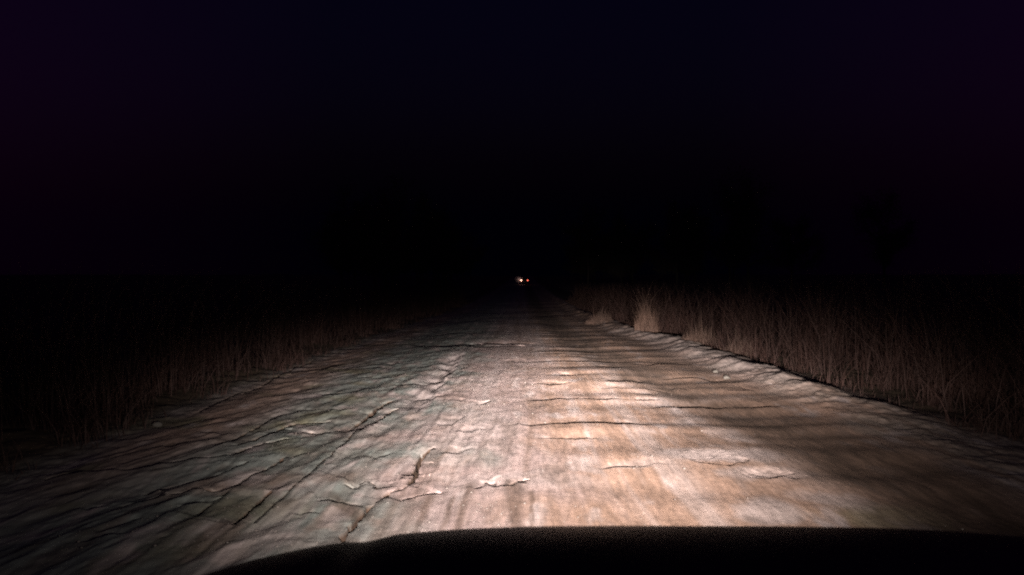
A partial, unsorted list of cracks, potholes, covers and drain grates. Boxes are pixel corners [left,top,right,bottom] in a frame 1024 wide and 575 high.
crack [473,478,532,492]
